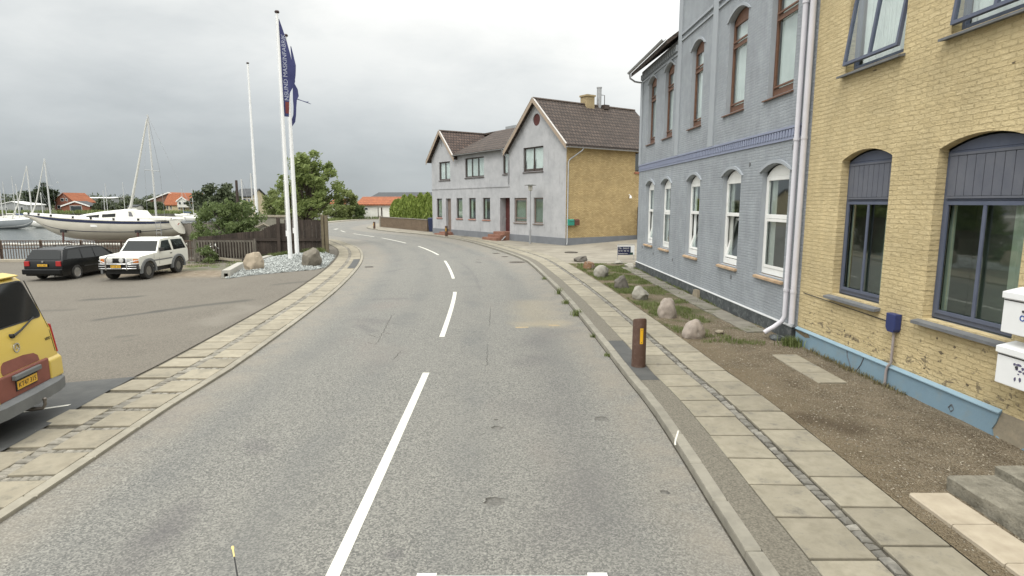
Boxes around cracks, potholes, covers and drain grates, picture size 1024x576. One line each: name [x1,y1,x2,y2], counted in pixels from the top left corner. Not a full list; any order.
pothole [484,497,505,506]
